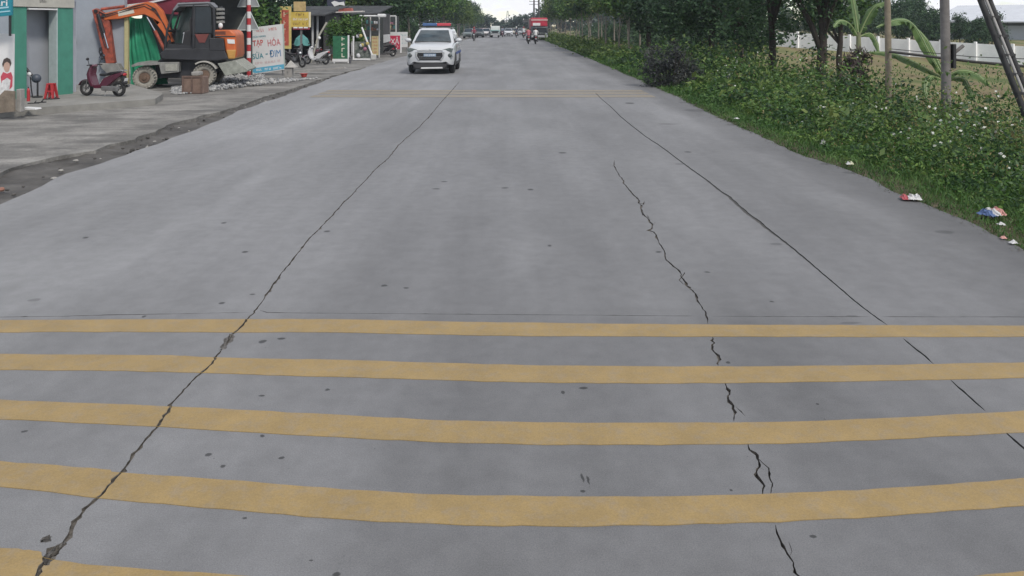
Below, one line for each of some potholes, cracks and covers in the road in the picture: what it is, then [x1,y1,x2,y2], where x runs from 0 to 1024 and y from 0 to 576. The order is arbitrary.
crack [603,100,1024,449]
crack [613,160,799,576]
crack [35,82,459,576]
